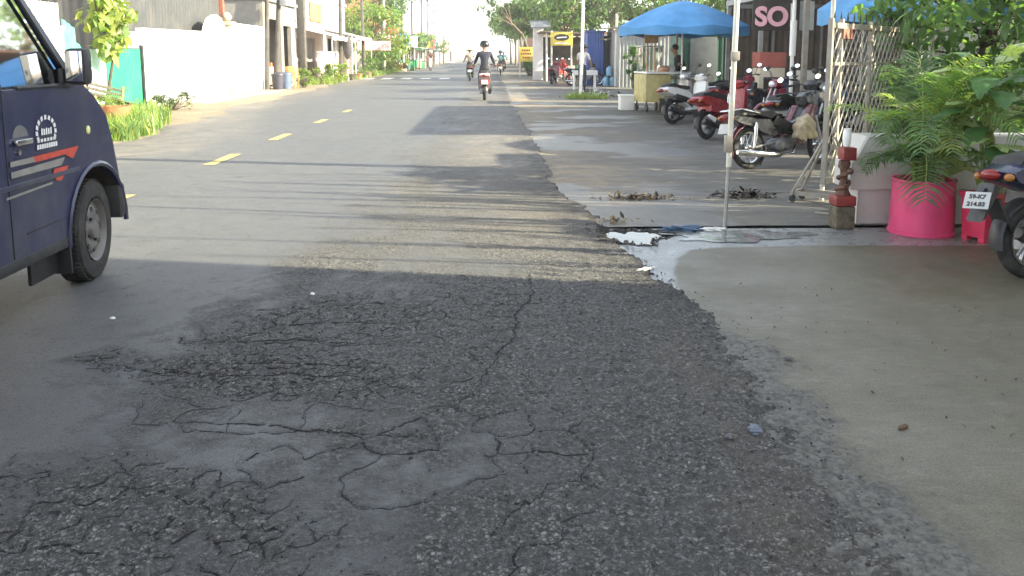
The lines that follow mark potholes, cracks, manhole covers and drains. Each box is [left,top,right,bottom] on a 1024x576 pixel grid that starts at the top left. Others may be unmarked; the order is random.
crack [133,394,445,510]
crack [0,452,380,576]
crack [412,366,599,576]
crack [404,277,537,380]
